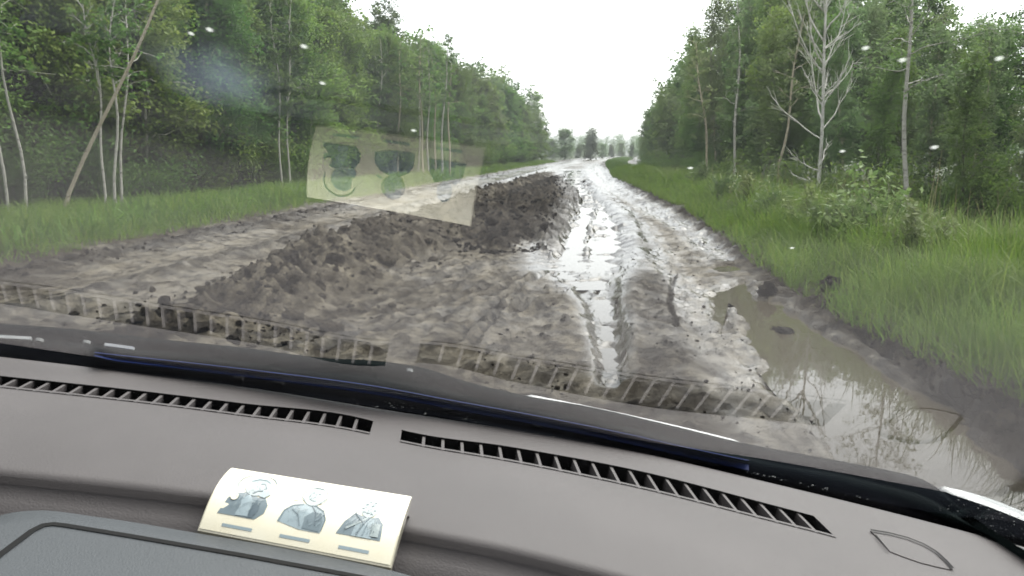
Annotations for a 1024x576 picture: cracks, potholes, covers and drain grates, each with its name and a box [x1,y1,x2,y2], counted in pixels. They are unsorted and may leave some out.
pothole [704,277,1024,471]
